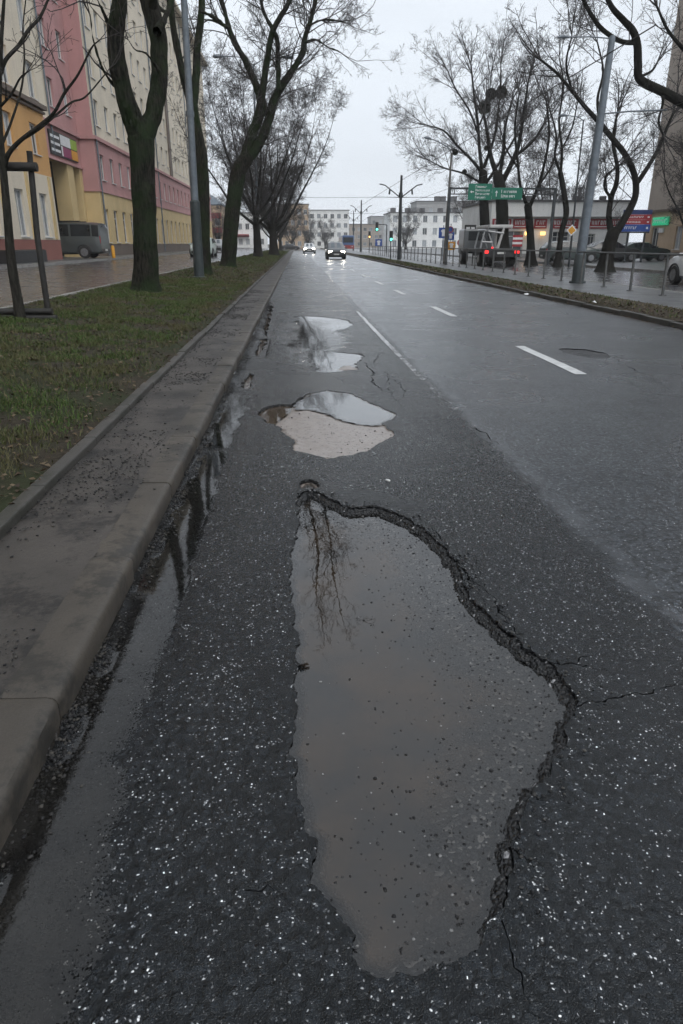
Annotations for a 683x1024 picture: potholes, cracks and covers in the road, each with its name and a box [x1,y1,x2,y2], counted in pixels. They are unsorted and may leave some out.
pothole [240,373,254,389]
pothole [287,489,577,979]
pothole [258,390,396,459]
crack [553,656,615,674]
crack [501,920,538,1017]
crack [363,345,430,401]
pothole [306,350,365,372]
pothole [294,316,353,343]
pothole [299,479,320,492]
crack [576,683,683,707]
